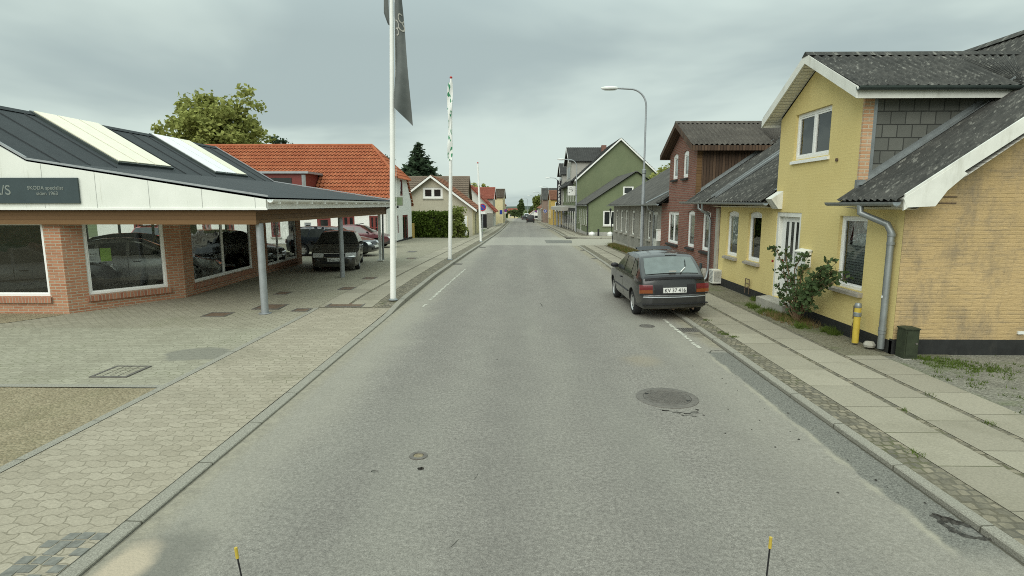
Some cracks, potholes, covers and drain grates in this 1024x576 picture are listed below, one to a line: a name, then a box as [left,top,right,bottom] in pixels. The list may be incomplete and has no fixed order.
utility cover [409,451,428,460]
manhole cover [636,388,699,409]
crack [660,409,705,417]
